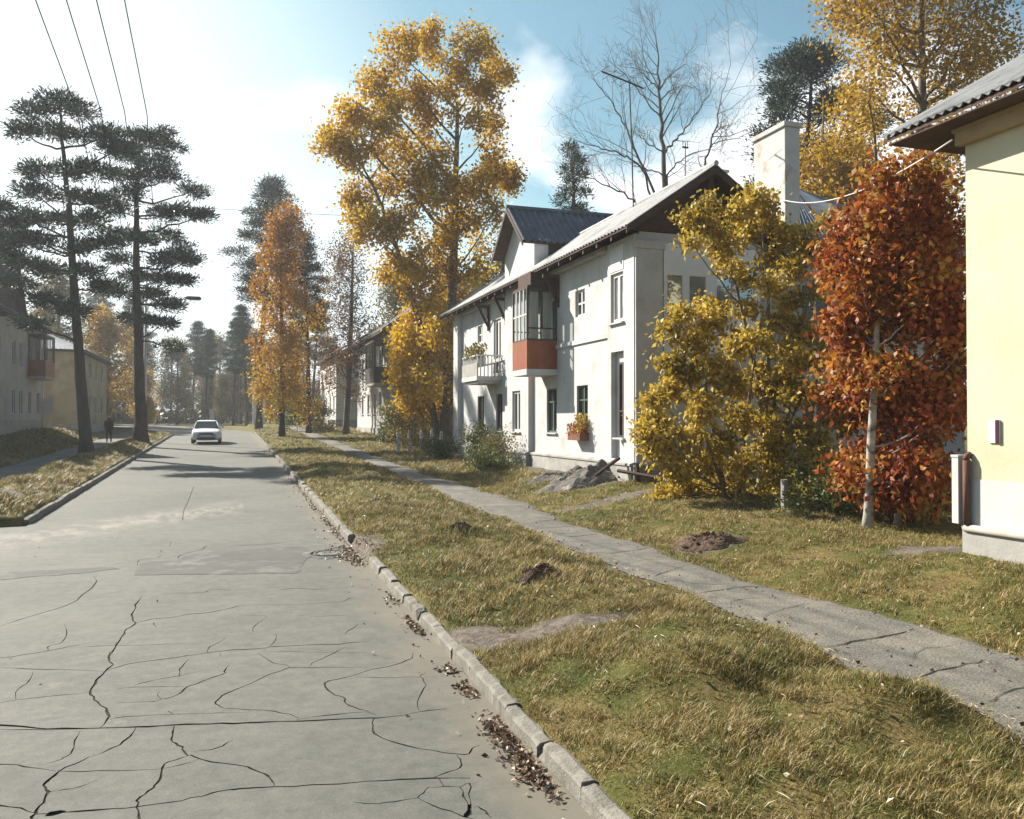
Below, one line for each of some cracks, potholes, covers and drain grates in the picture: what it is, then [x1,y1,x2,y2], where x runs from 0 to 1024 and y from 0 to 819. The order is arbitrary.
crack [0,578,492,819]
crack [833,628,992,679]
manhole cover [302,549,359,559]
